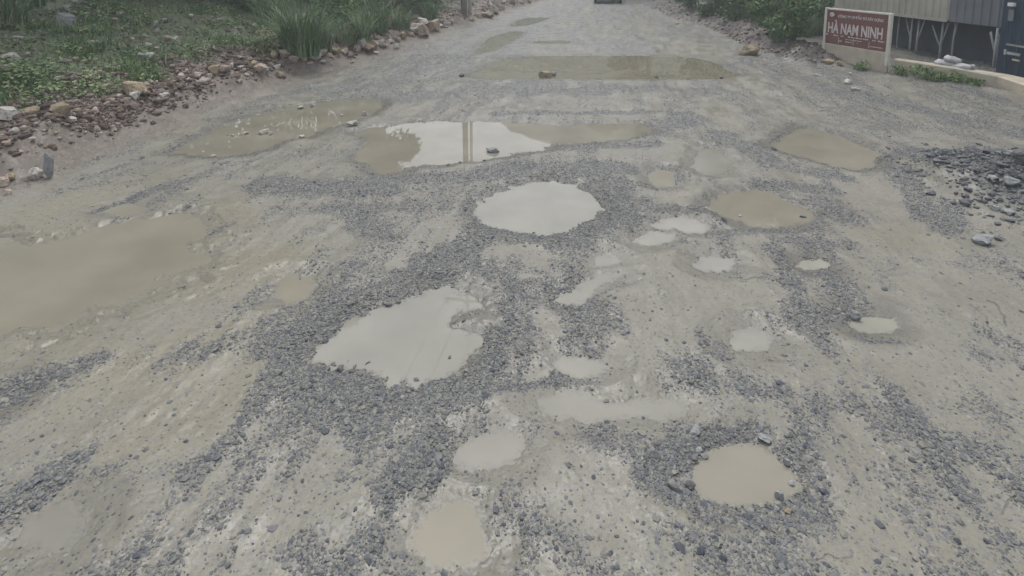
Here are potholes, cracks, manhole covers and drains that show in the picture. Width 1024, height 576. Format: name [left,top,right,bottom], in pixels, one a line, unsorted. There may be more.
pothole [716,321,785,360]
pothole [0,208,224,341]
pothole [0,488,104,571]
pothole [642,213,721,236]
pothole [660,432,813,518]
pothole [521,380,696,435]
pothole [701,187,820,231]
pothole [297,281,493,393]
pothole [259,268,331,312]
pothole [837,310,910,337]
pothole [467,54,744,80]
pothole [465,179,611,239]
